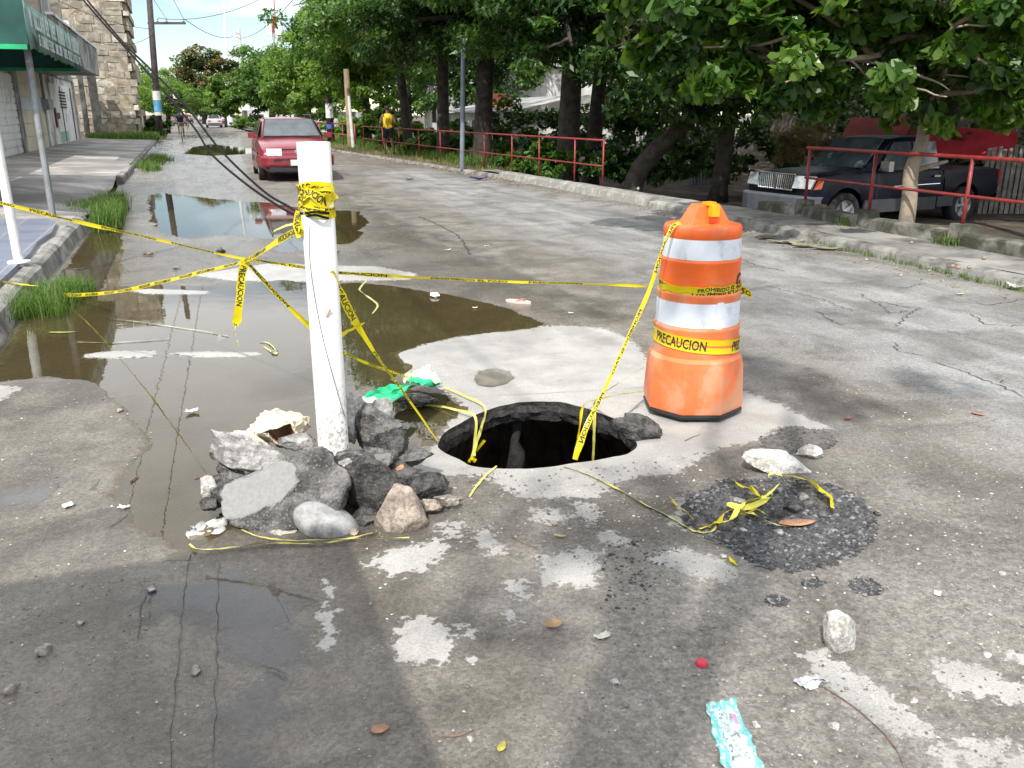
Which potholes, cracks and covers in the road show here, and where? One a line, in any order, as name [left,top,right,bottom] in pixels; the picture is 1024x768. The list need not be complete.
crack [366,206,498,254]
pothole [438,401,637,469]
crack [212,562,220,764]
crack [747,261,1023,397]
crack [170,554,191,768]
